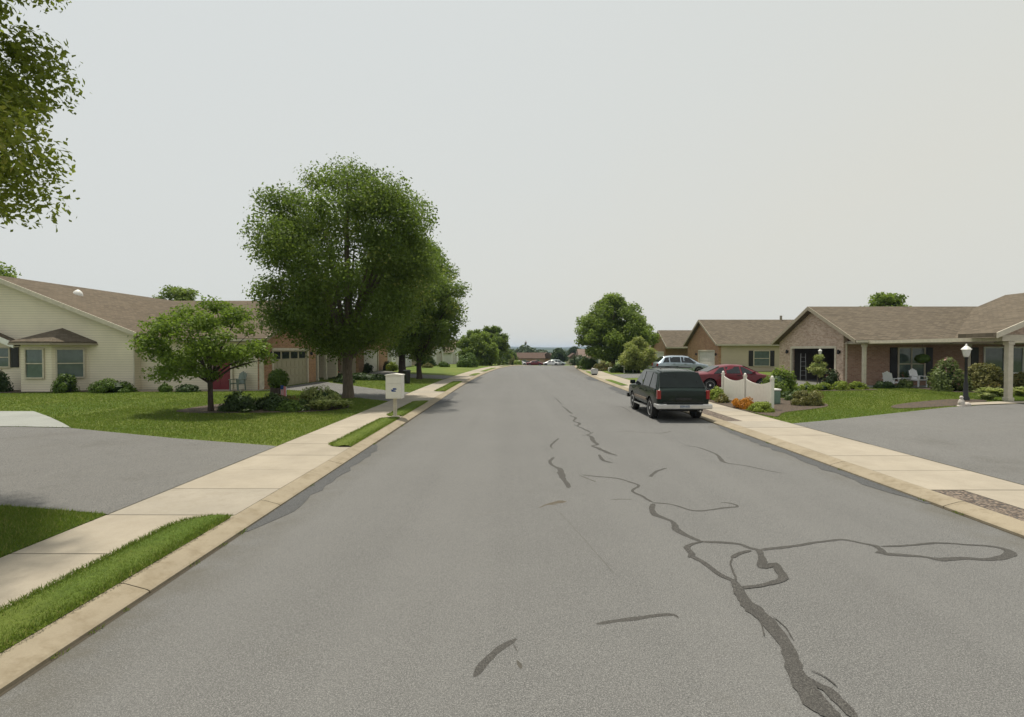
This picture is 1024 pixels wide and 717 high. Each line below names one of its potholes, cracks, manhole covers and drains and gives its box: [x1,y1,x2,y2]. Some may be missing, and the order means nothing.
crack [539,500,614,573]
